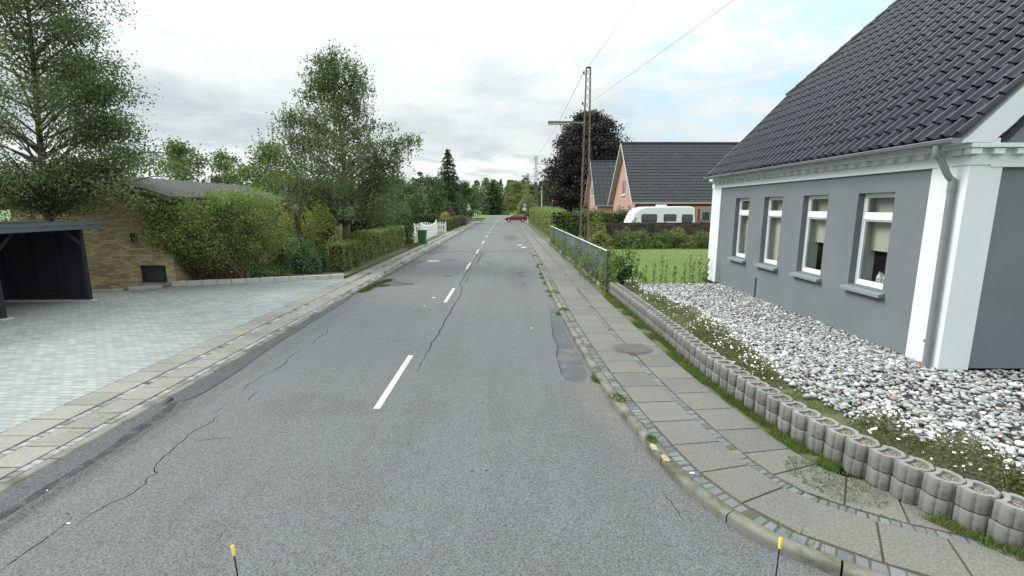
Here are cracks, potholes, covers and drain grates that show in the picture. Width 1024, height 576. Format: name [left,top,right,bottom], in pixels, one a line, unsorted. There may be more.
manhole cover [612,343,653,355]
crack [78,405,233,524]
crack [3,513,72,569]
crack [416,246,497,372]
